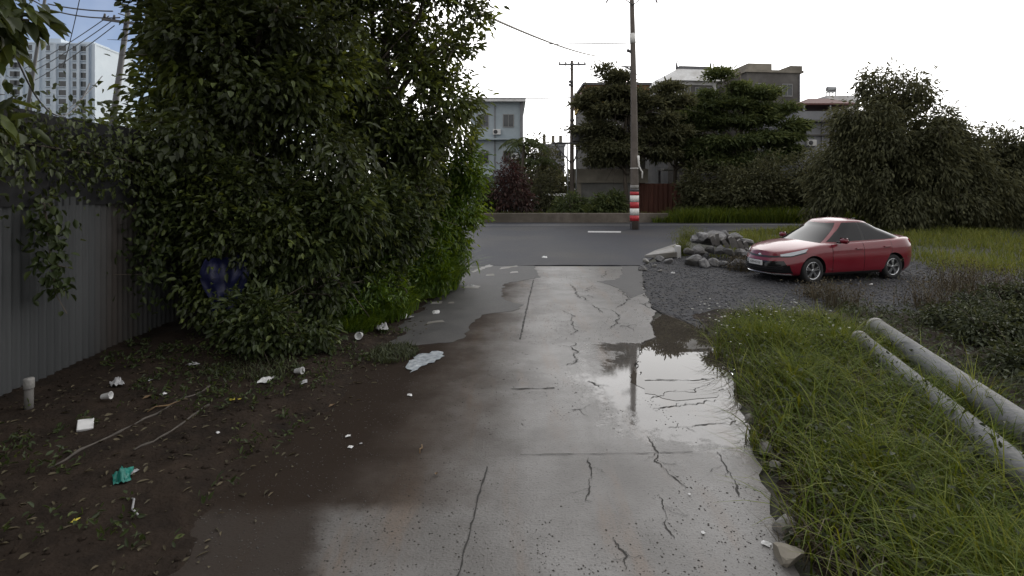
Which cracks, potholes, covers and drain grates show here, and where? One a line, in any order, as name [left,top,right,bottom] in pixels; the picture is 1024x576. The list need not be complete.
crack [575,460,605,502]
crack [647,383,716,539]
crack [614,540,641,570]
crack [557,273,652,365]
